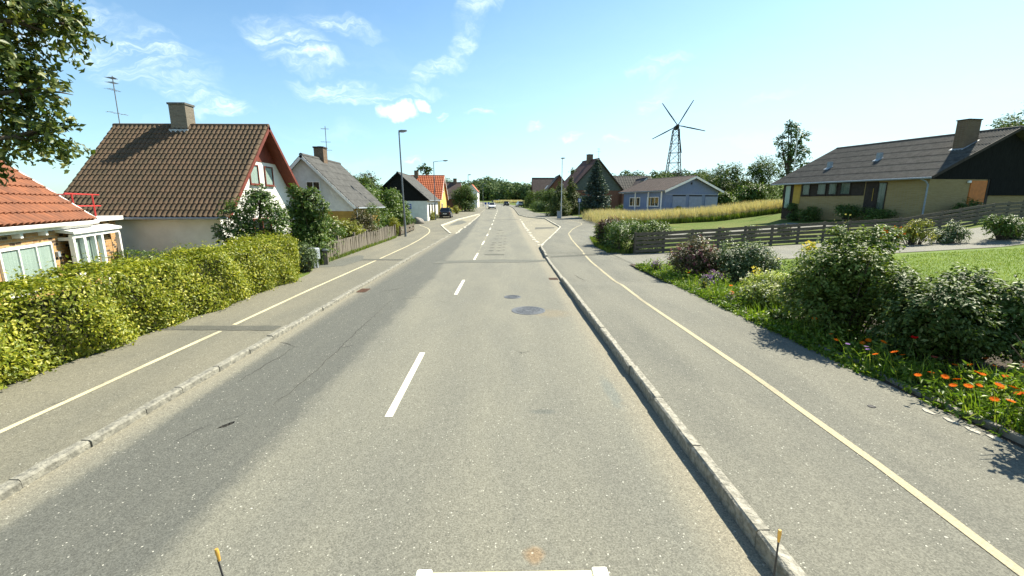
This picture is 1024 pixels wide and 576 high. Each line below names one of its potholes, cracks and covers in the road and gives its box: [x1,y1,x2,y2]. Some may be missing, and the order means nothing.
crack [273,289,420,405]
manhole cover [511,306,545,315]
